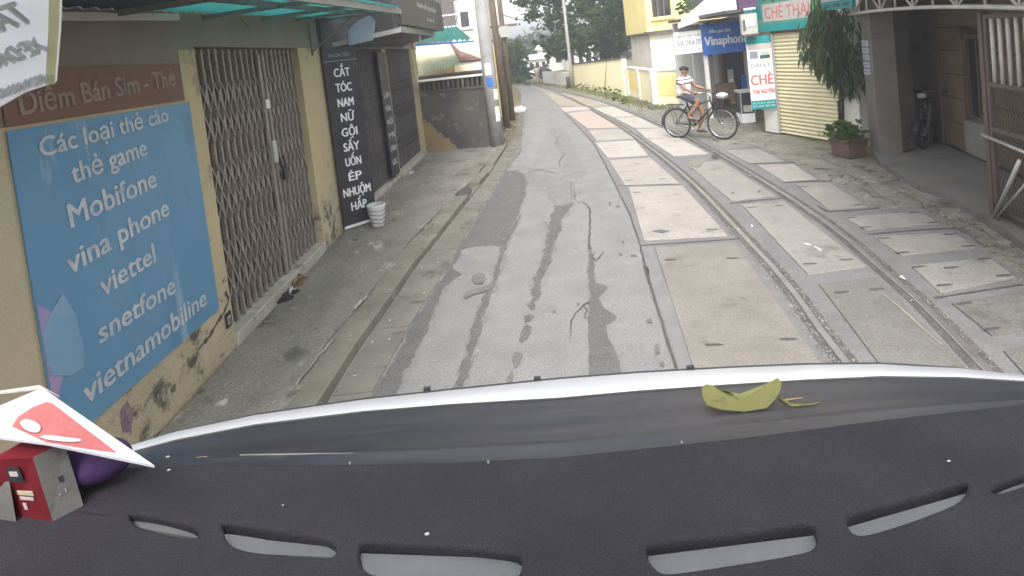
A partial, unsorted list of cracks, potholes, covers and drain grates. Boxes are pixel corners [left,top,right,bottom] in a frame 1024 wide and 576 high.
crack [570,302,589,336]
crack [528,135,604,261]
